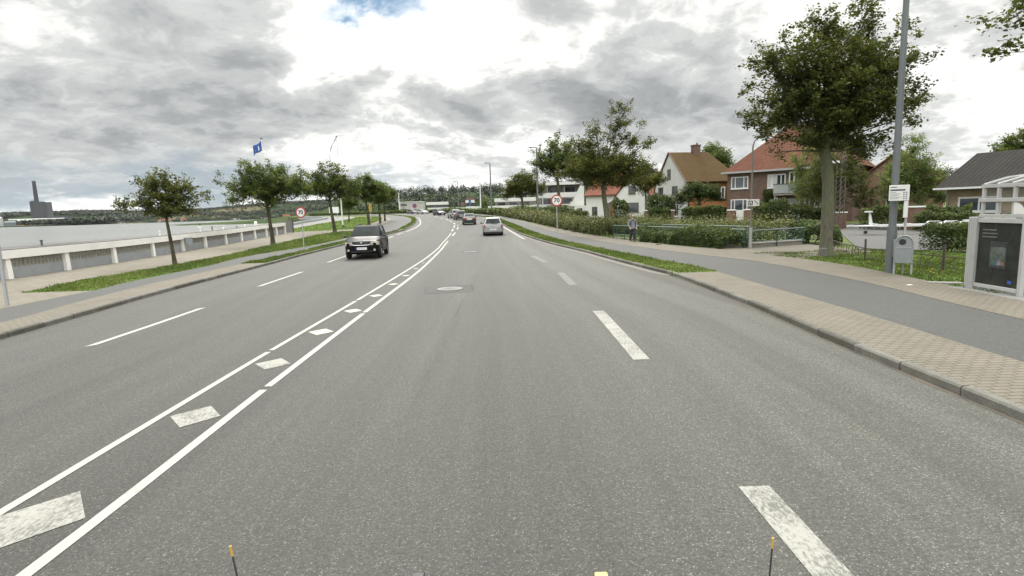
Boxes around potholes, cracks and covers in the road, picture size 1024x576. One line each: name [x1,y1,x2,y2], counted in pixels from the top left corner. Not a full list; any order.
manhole cover [425,285,474,294]
